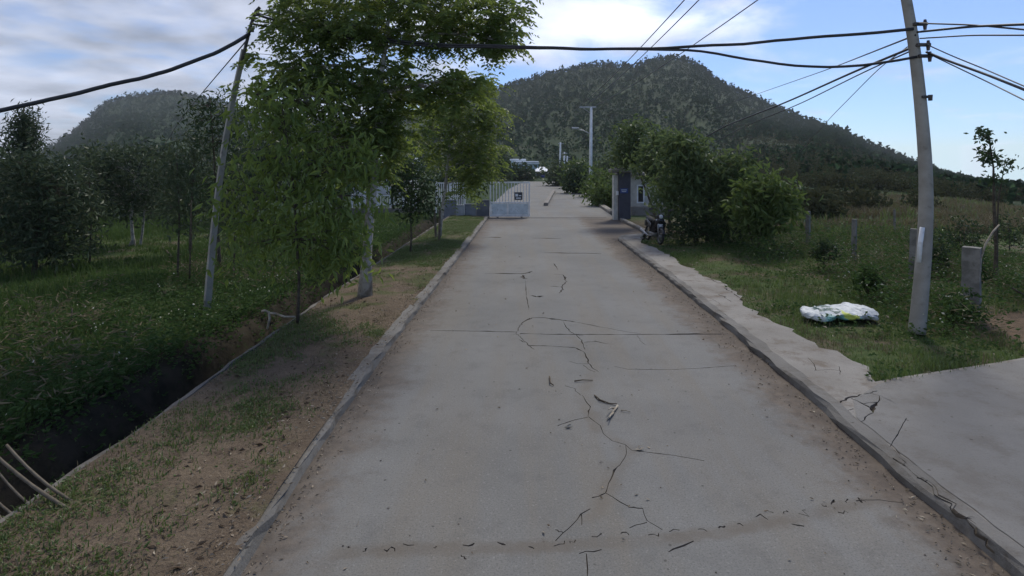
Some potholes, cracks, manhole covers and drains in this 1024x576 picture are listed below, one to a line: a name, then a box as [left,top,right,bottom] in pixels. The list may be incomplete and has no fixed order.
crack [348,263,902,576]
